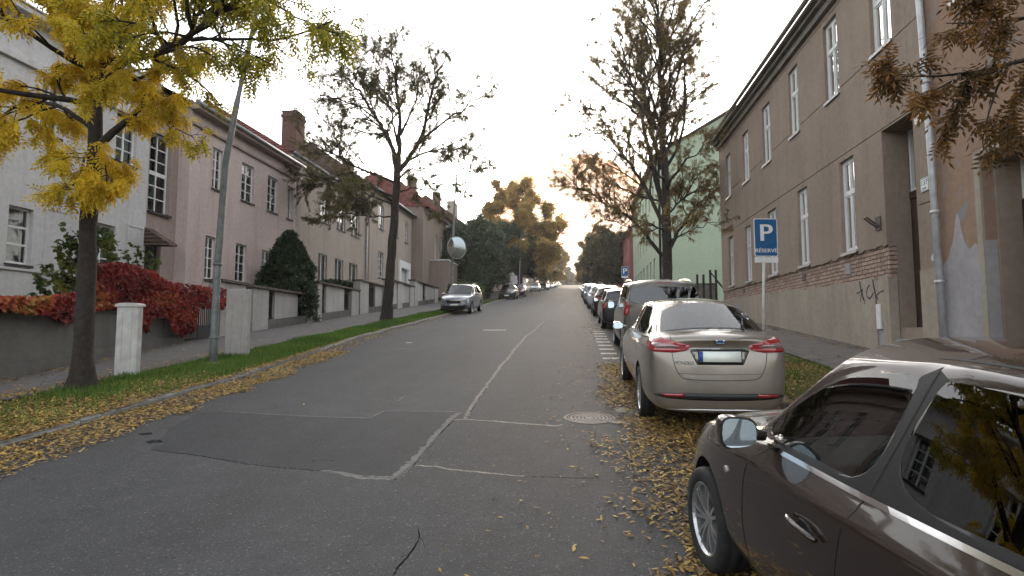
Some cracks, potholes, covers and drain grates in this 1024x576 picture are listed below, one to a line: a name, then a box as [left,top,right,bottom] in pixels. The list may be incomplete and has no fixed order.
manhole cover [564,412,615,424]
crack [393,527,425,576]
